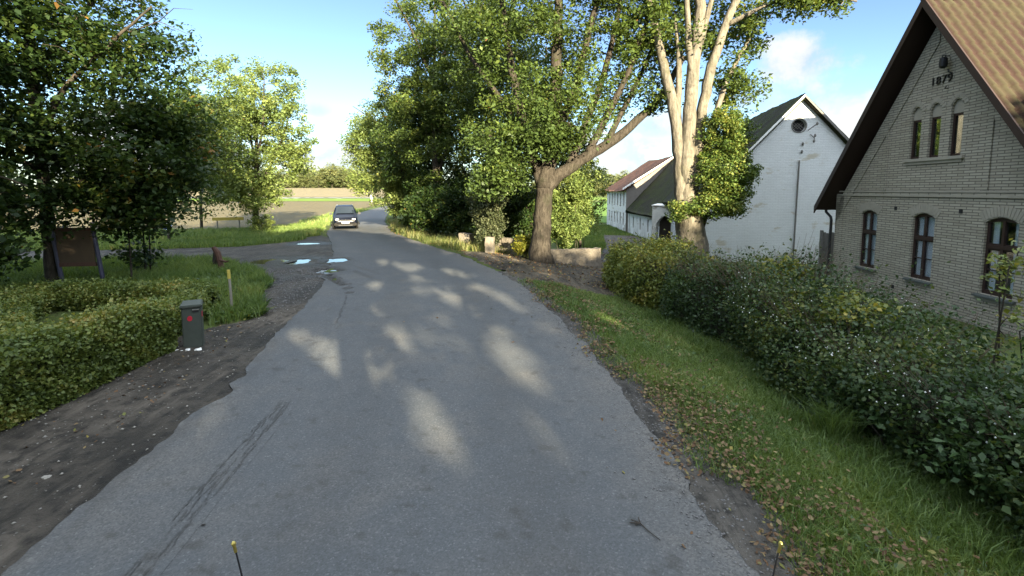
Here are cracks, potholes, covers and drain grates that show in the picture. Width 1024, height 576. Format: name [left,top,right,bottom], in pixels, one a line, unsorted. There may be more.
crack [316,274,356,325]
crack [112,397,300,576]
